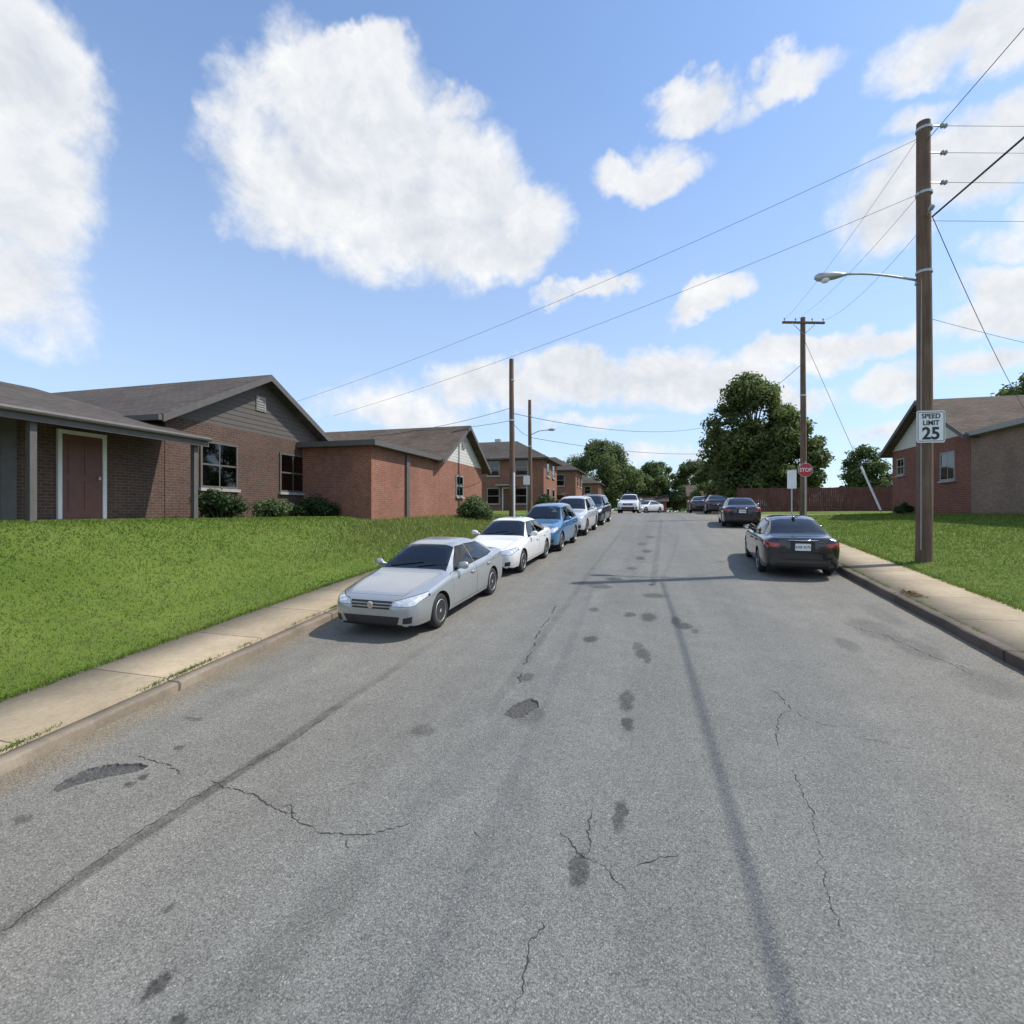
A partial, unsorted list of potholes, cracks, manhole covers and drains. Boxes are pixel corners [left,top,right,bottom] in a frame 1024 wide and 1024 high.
crack [560,809,680,891]
pothole [498,696,544,722]
crack [794,773,845,935]
crack [507,919,547,1023]
crack [517,605,557,684]
crack [0,717,411,932]
crack [774,691,917,751]
